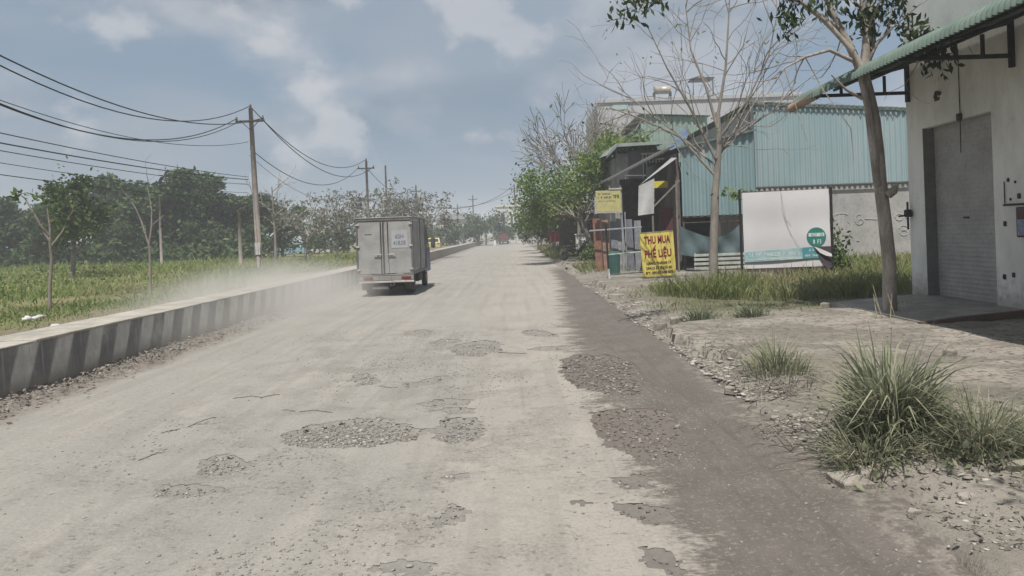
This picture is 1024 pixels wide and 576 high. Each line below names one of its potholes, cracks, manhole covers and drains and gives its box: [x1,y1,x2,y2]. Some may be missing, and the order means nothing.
pothole [611,502,675,526]
crack [138,417,216,461]
pothole [638,546,689,576]
pothole [449,340,505,357]
pothole [367,559,437,576]
pothole [431,407,475,415]
pothole [610,474,657,490]
pothole [557,354,649,397]
pothole [415,398,474,409]
pothole [346,373,381,386]
pothole [280,417,431,449]
pothole [151,484,227,500]
